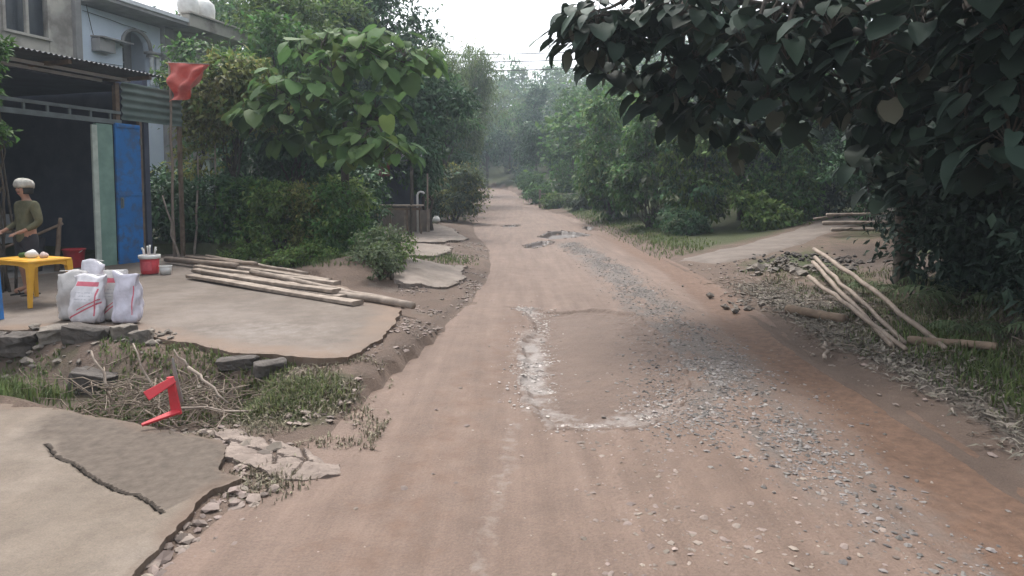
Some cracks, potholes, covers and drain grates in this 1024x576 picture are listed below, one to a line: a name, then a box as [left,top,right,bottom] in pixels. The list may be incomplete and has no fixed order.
crack [46,446,162,515]
pothole [490,306,713,439]
pothole [538,230,591,239]
pothole [523,240,556,248]
